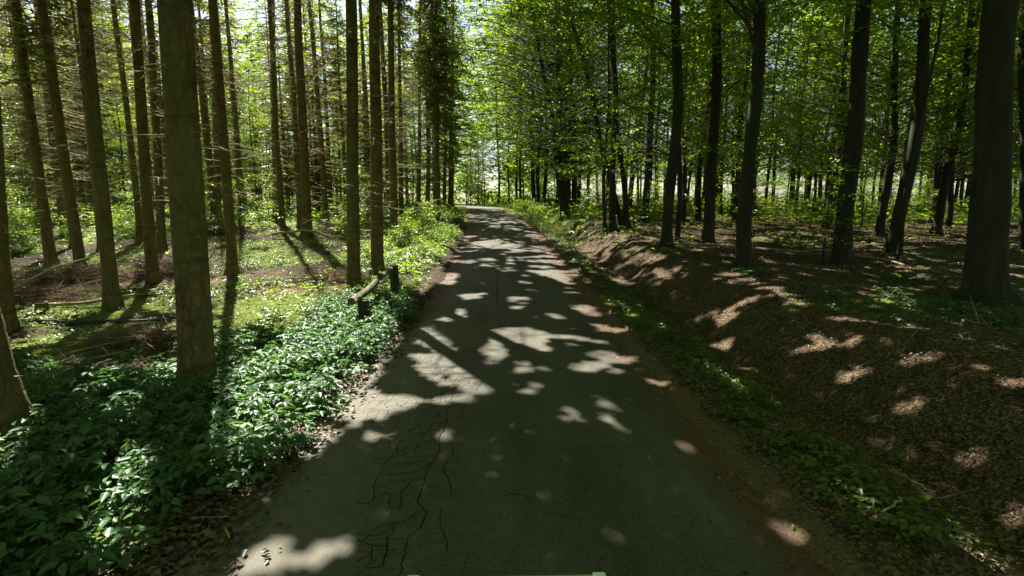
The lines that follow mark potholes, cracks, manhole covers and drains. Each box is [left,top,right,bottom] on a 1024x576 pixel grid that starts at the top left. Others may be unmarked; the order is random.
crack [343,340,486,576]
